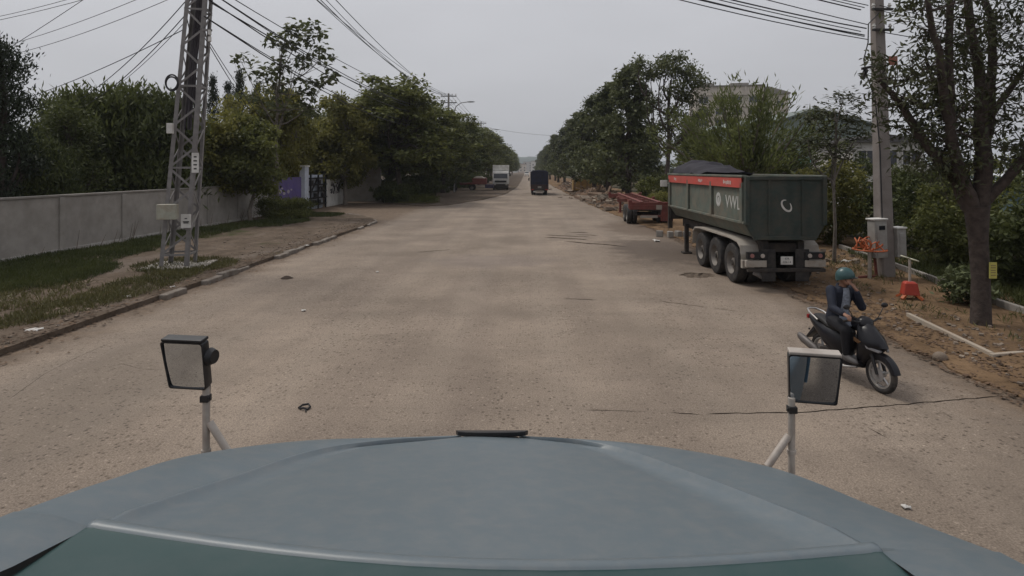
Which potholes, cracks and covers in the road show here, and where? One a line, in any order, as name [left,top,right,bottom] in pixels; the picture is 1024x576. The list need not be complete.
crack [599,396,998,438]
